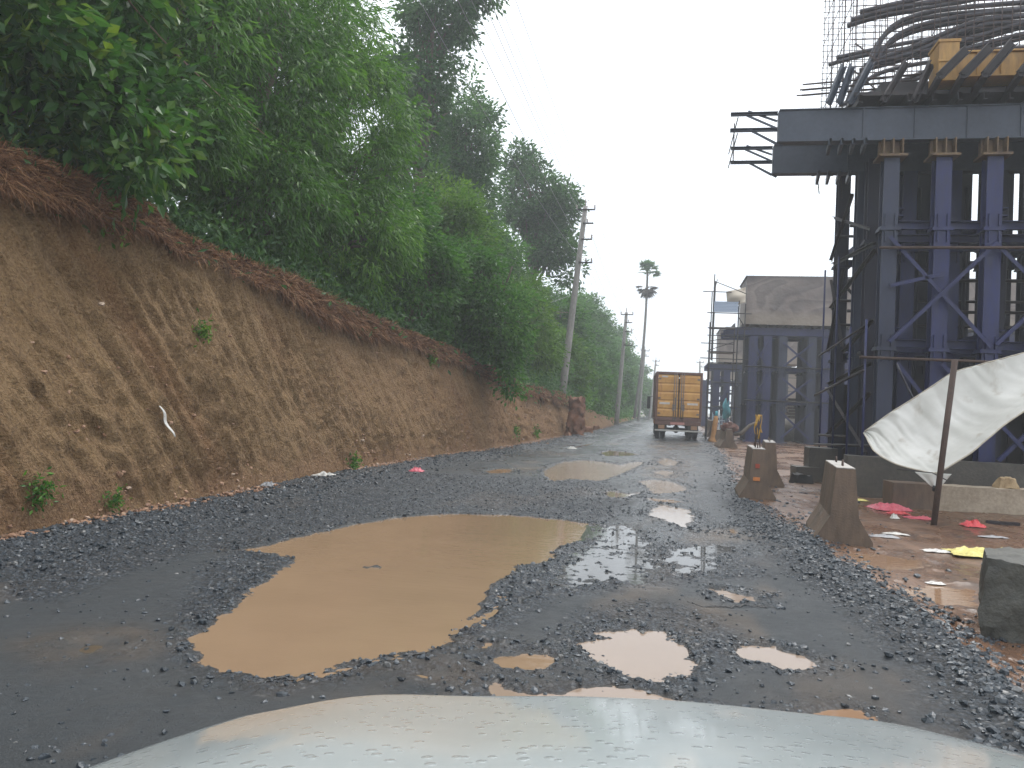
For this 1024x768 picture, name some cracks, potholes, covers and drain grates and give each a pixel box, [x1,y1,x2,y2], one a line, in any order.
pothole [188,512,594,682]
pothole [636,478,690,494]
pothole [480,675,703,703]
pothole [659,542,750,576]
pothole [644,502,696,528]
pothole [705,585,766,603]
pothole [542,523,677,591]
pothole [543,460,645,481]
pothole [731,641,826,671]
pothole [575,622,706,683]
